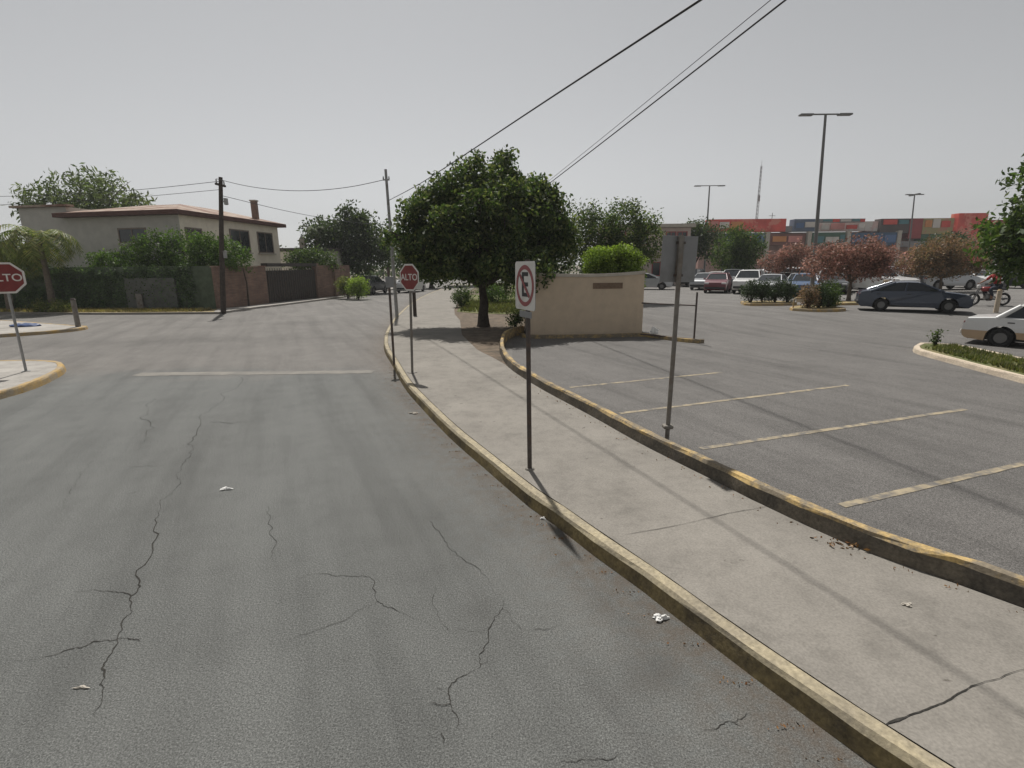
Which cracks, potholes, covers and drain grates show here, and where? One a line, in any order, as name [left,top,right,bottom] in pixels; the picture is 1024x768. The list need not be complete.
crack [6,376,243,749]
crack [280,573,434,642]
crack [885,669,1023,725]
crack [430,521,559,742]
